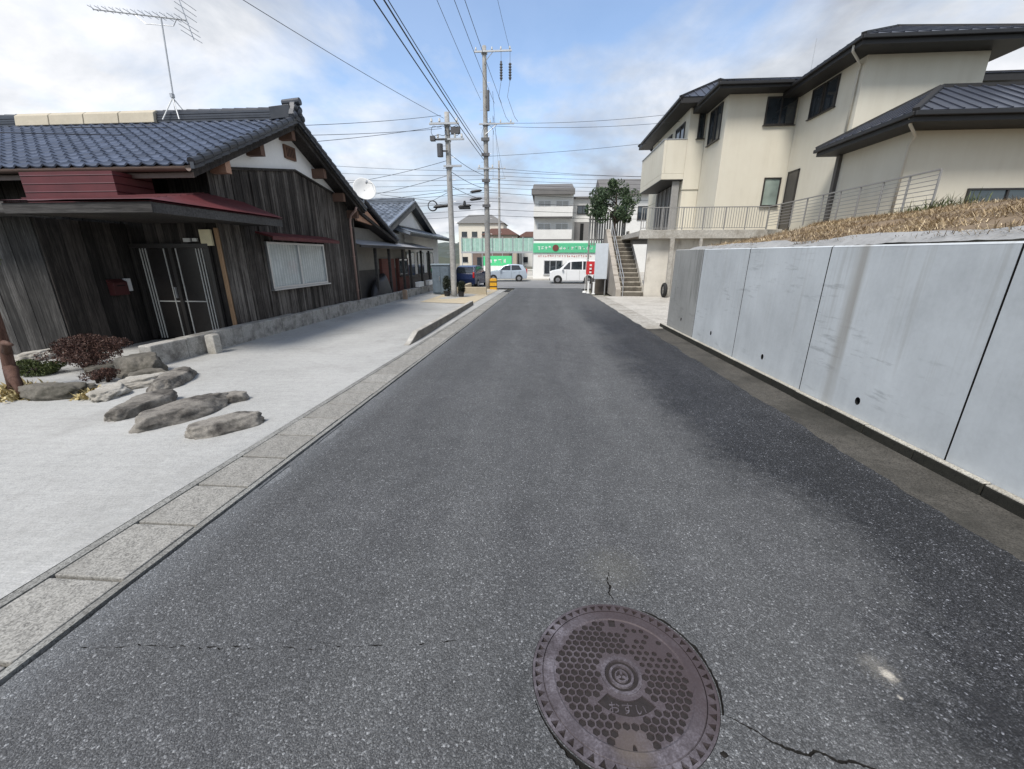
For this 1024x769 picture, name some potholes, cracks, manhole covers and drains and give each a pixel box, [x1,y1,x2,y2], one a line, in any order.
crack [81,640,456,650]
crack [640,610,876,769]
manhole cover [532,604,720,769]
